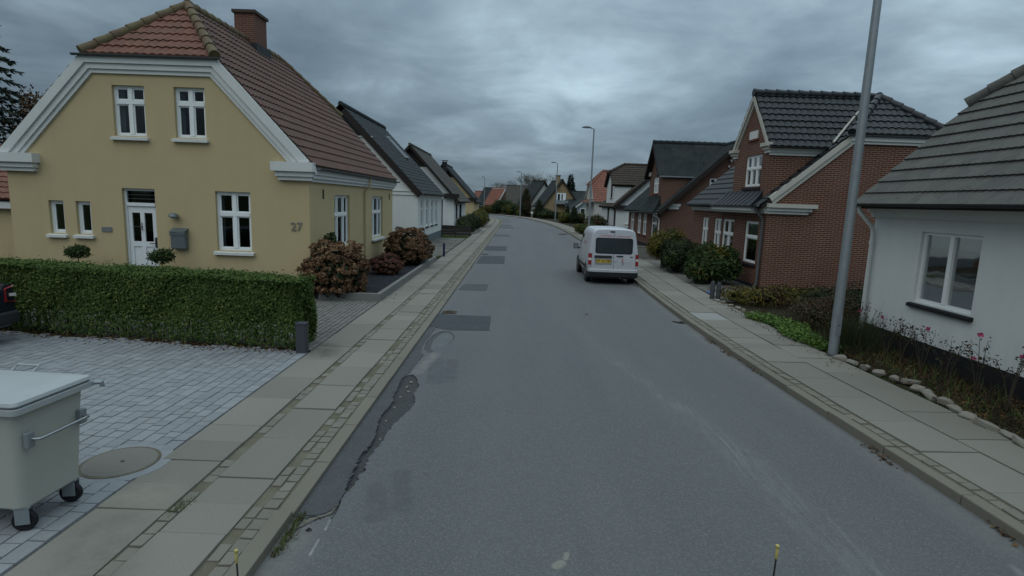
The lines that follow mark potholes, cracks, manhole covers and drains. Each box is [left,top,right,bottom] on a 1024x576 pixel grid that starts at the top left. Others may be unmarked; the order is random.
manhole cover [78,443,173,485]
pothole [345,375,419,493]
